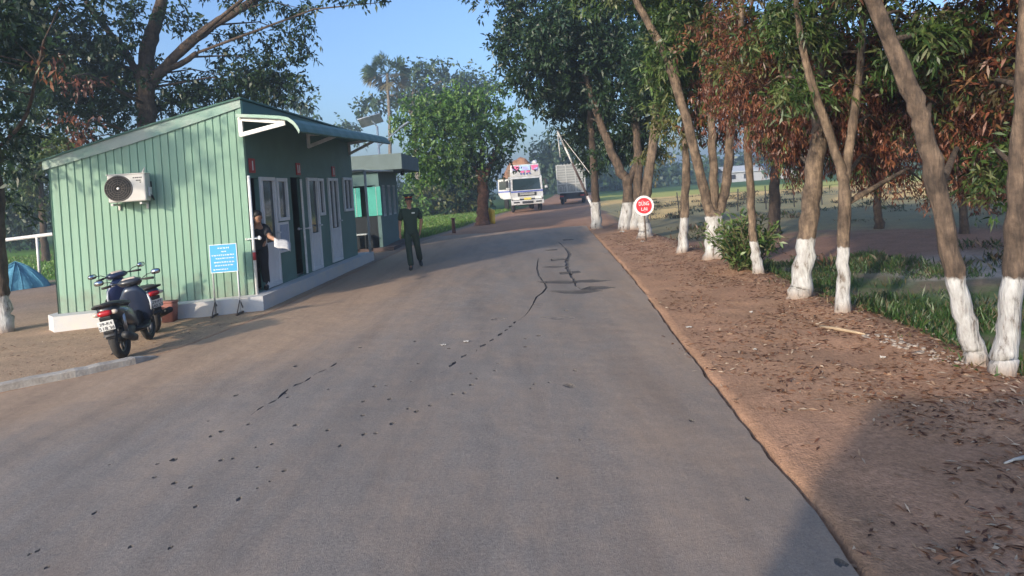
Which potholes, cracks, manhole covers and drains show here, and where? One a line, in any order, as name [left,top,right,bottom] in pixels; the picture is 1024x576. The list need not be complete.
crack [251,363,336,415]
crack [441,239,616,373]
